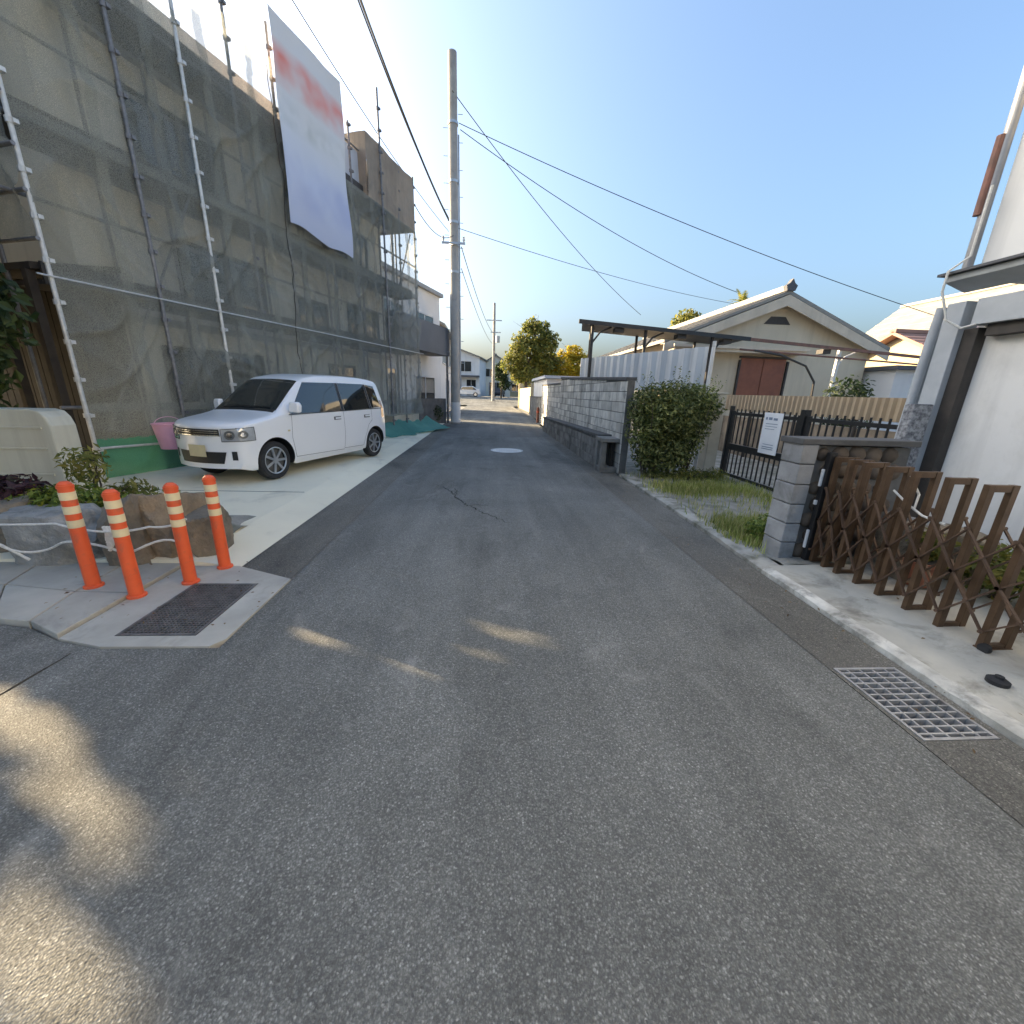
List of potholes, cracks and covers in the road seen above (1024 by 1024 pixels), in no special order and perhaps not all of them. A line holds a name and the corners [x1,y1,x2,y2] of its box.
drain grate [115,583,258,636]
crack [435,484,509,523]
drain grate [831,667,1001,765]
